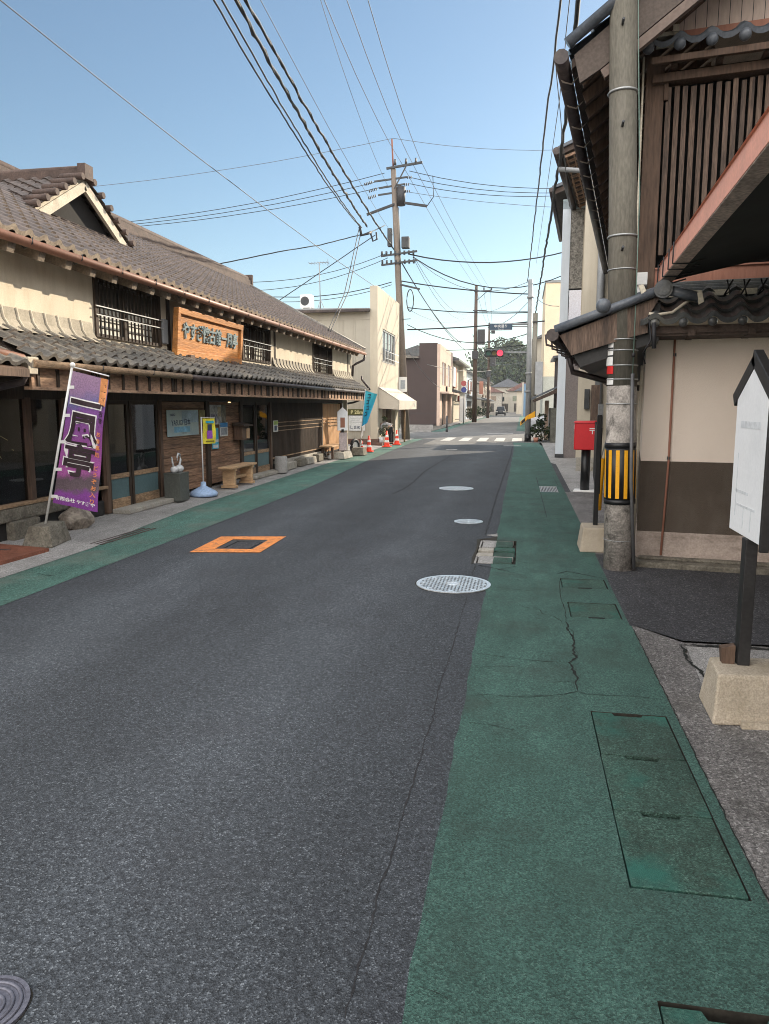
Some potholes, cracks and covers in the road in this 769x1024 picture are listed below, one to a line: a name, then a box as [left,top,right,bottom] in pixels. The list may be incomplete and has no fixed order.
manhole cover [0,975,33,1024]
manhole cover [415,575,491,594]
crack [475,541,655,699]
drain grate [90,528,156,545]
